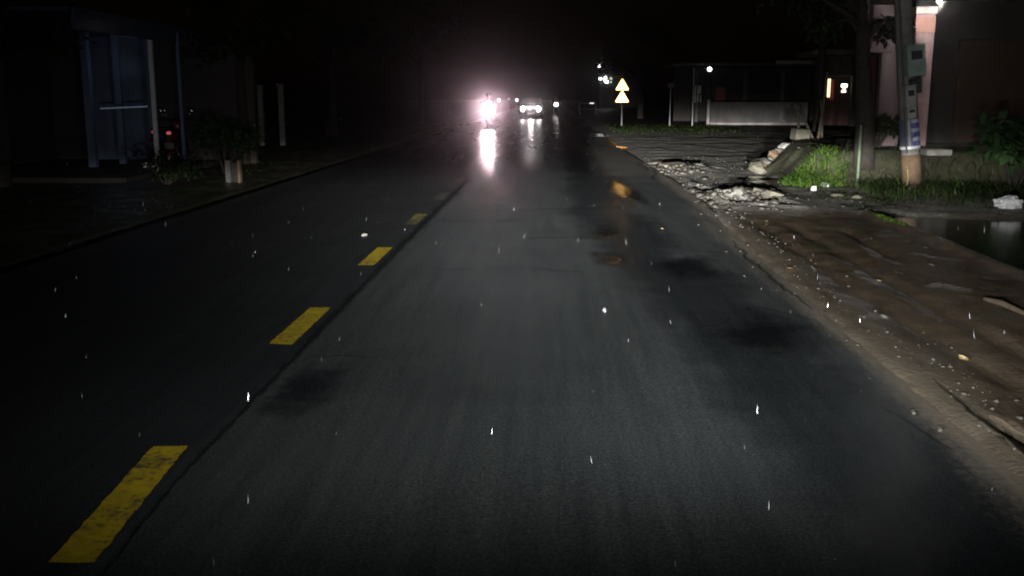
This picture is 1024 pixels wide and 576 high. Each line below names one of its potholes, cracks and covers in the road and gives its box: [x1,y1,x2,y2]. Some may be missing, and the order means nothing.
pothole [747,193,797,205]
pothole [718,190,756,202]
crack [878,378,1024,457]
